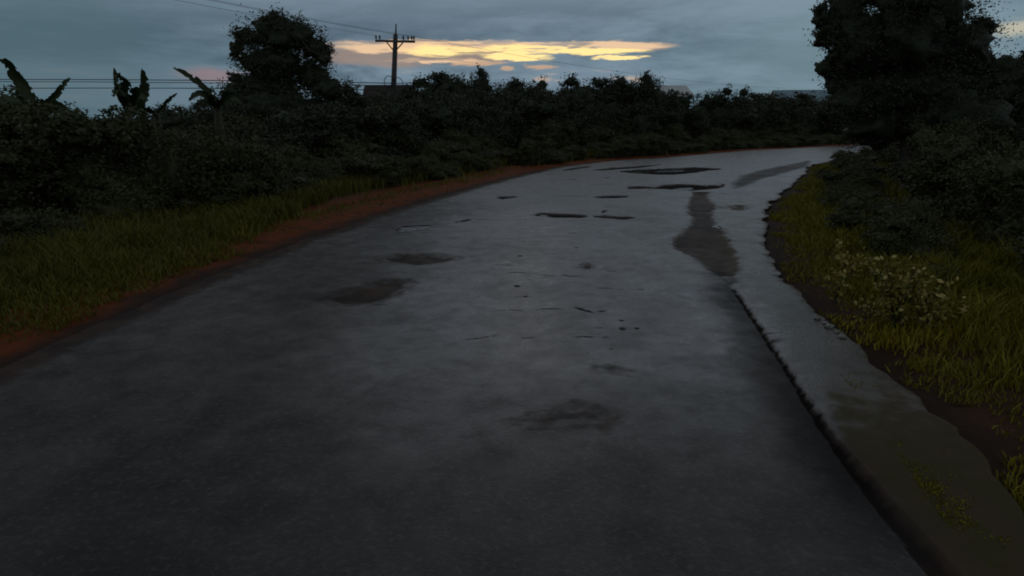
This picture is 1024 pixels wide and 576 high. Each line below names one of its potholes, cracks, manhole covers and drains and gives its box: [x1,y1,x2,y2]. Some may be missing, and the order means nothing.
pothole [619,167,724,175]
pothole [379,253,463,266]
pothole [317,278,415,305]
pothole [509,400,623,430]
pothole [593,363,633,376]
